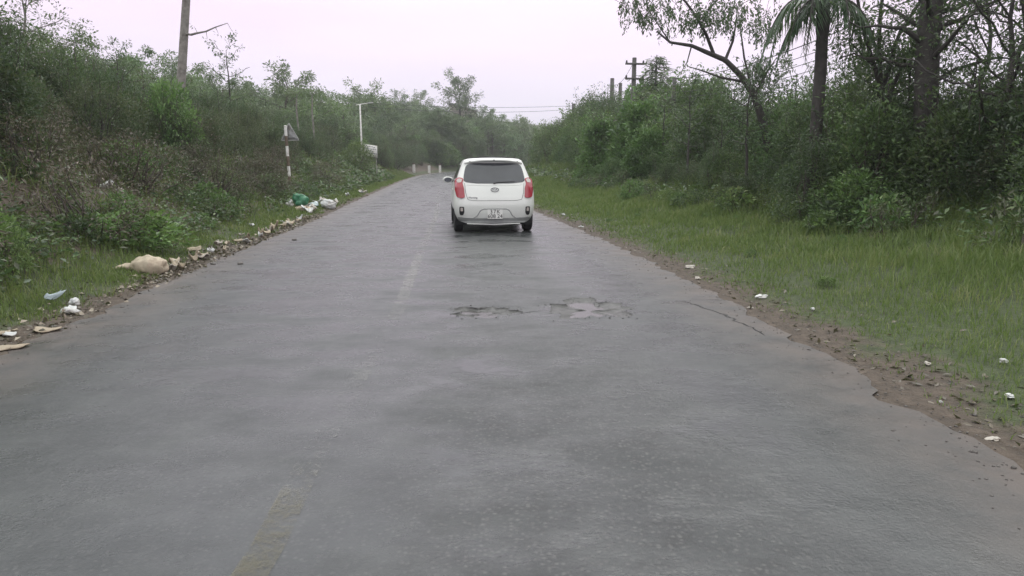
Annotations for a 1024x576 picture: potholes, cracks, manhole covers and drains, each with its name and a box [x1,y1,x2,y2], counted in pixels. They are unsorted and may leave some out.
pothole [538,297,638,321]
pothole [450,305,530,319]
crack [682,301,764,335]
